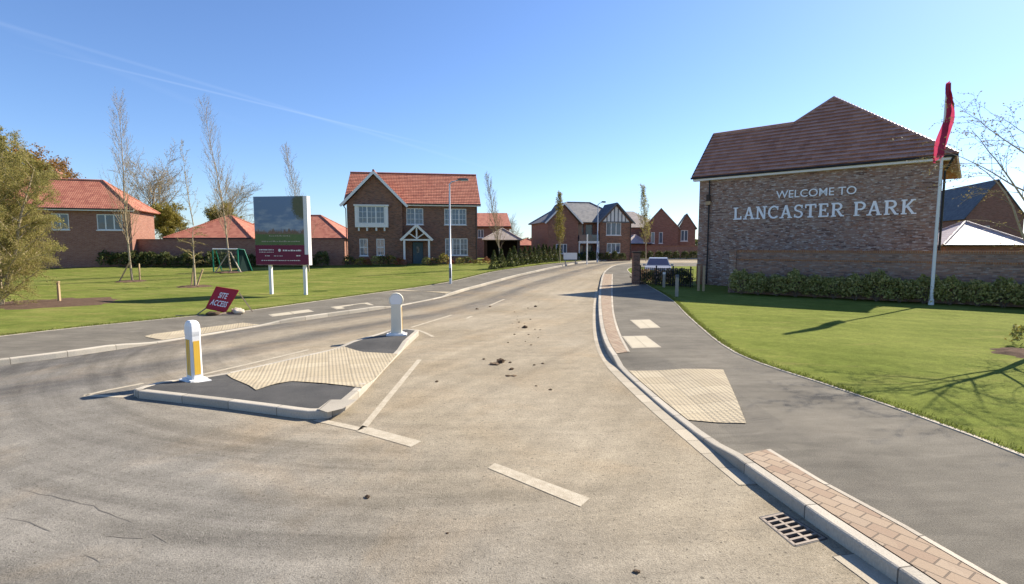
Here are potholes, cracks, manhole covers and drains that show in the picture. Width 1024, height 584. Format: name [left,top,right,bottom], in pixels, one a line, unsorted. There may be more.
crack [20,489,166,542]
drain grate [759,512,827,547]
